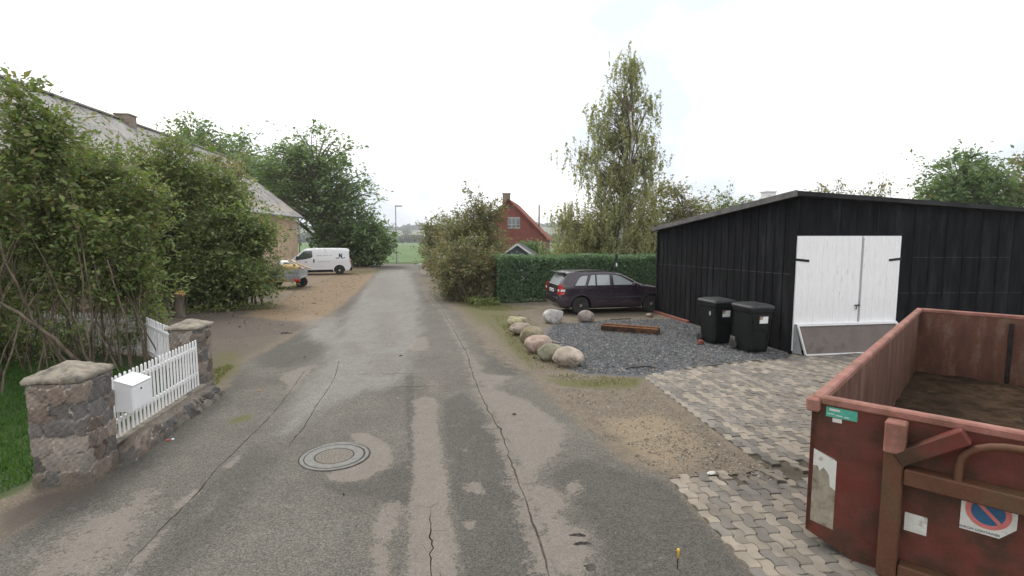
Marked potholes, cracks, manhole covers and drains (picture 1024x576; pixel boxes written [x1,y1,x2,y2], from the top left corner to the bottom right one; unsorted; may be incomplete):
crack [414,504,446,576]
manhole cover [298,443,371,471]
crack [290,362,339,444]
crack [126,368,310,570]
